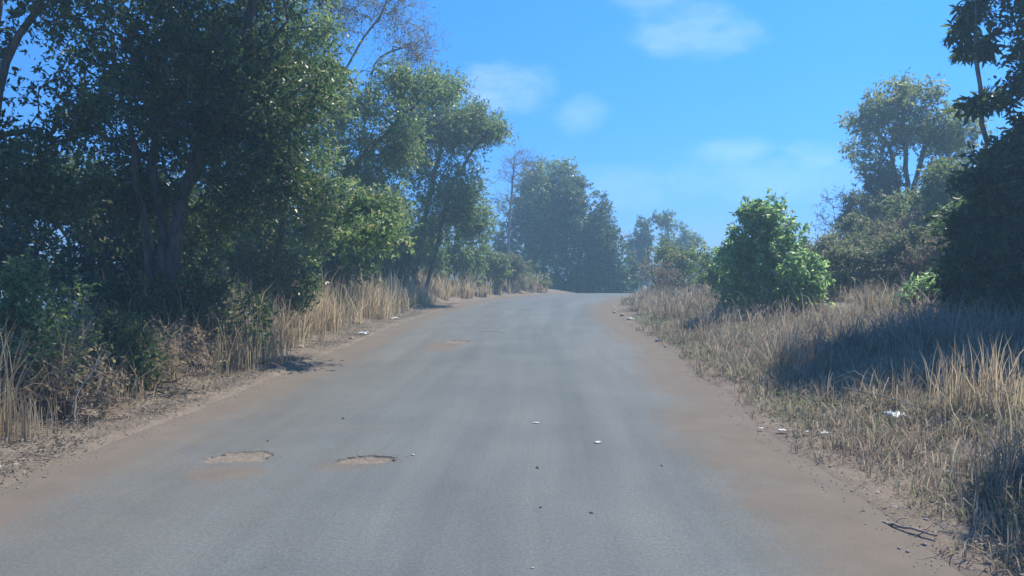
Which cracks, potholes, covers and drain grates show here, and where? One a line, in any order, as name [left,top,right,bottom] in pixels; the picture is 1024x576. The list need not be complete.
pothole [329,454,407,465]
pothole [201,449,274,464]
